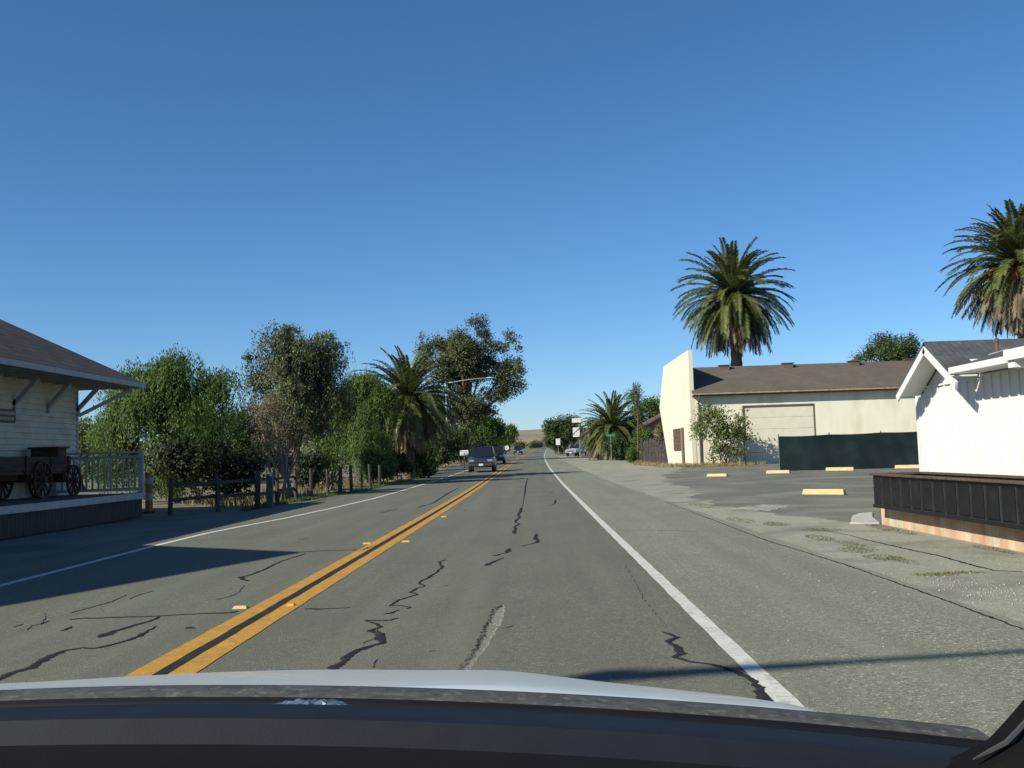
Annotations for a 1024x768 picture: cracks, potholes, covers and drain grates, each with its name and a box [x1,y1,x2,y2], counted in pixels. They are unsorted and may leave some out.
crack [14,590,154,630]
